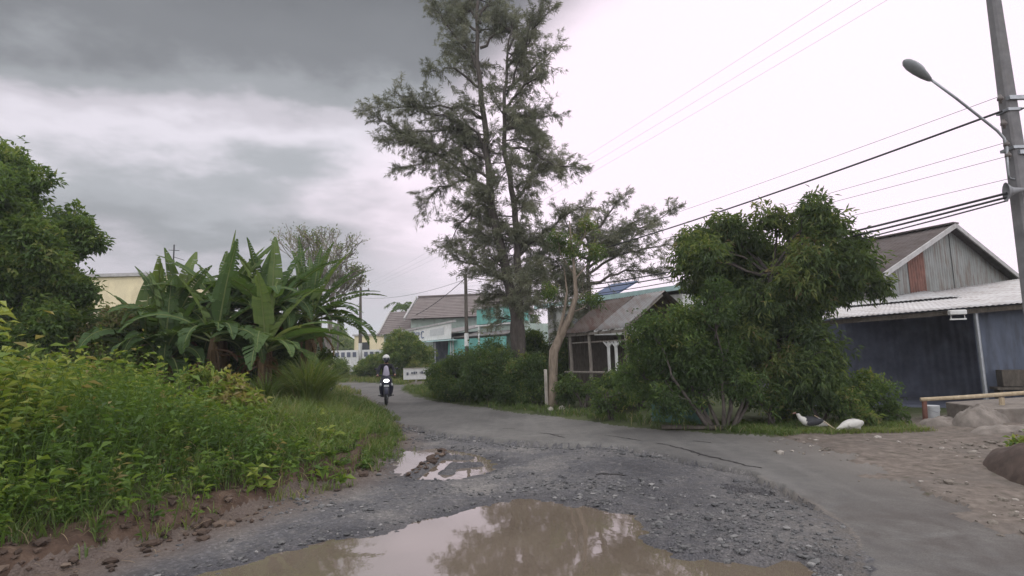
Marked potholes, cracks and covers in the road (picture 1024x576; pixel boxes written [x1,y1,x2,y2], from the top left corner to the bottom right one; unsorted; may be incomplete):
pothole [7,388,878,576]
crack [658,441,762,468]
